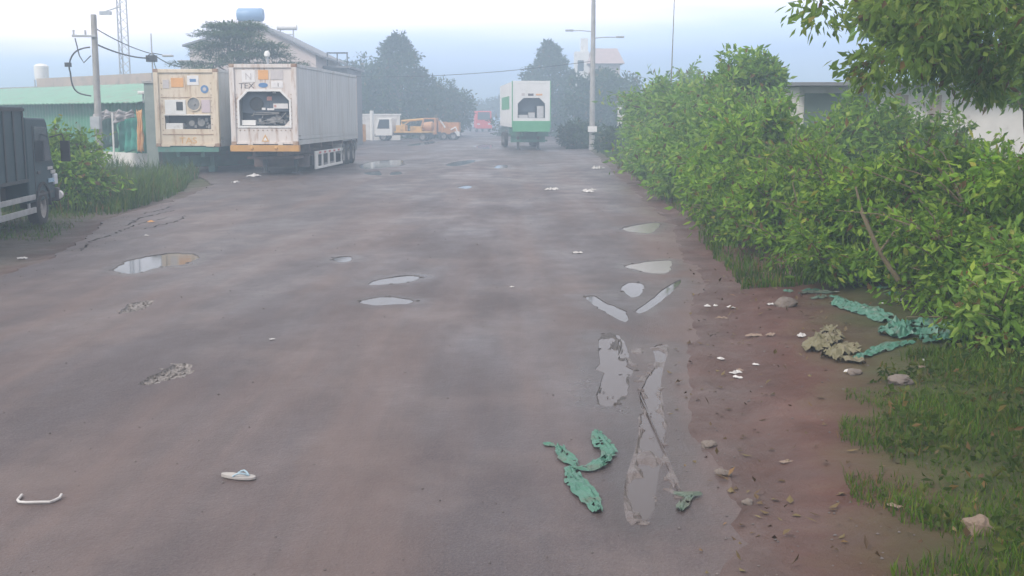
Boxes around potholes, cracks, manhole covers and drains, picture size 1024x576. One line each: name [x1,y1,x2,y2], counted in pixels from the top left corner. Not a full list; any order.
pothole [112,253,200,274]
crack [79,206,184,251]
pothole [368,275,423,285]
pothole [357,295,420,305]
pothole [583,295,629,322]
pothole [623,260,673,274]
pothole [621,281,645,298]
pothole [595,332,639,407]
pothole [116,300,154,314]
pothole [633,280,681,313]
pothole [138,363,195,385]
